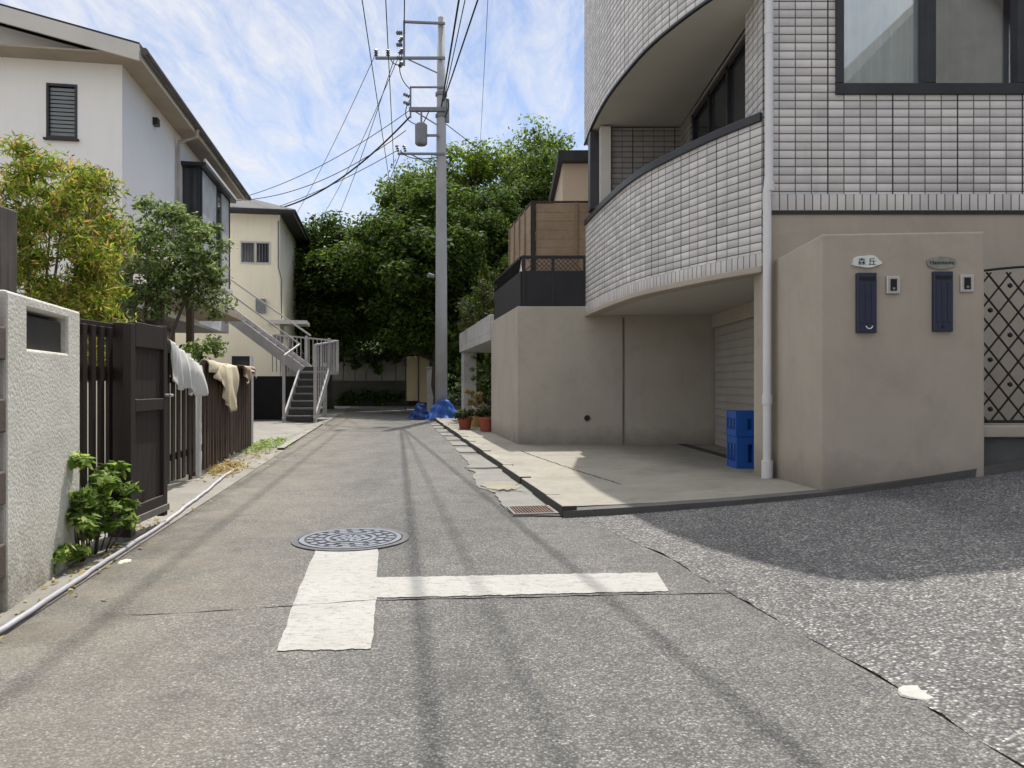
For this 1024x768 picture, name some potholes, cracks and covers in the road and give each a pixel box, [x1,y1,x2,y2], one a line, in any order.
drain grate [506,505,559,517]
manhole cover [291,527,409,552]
